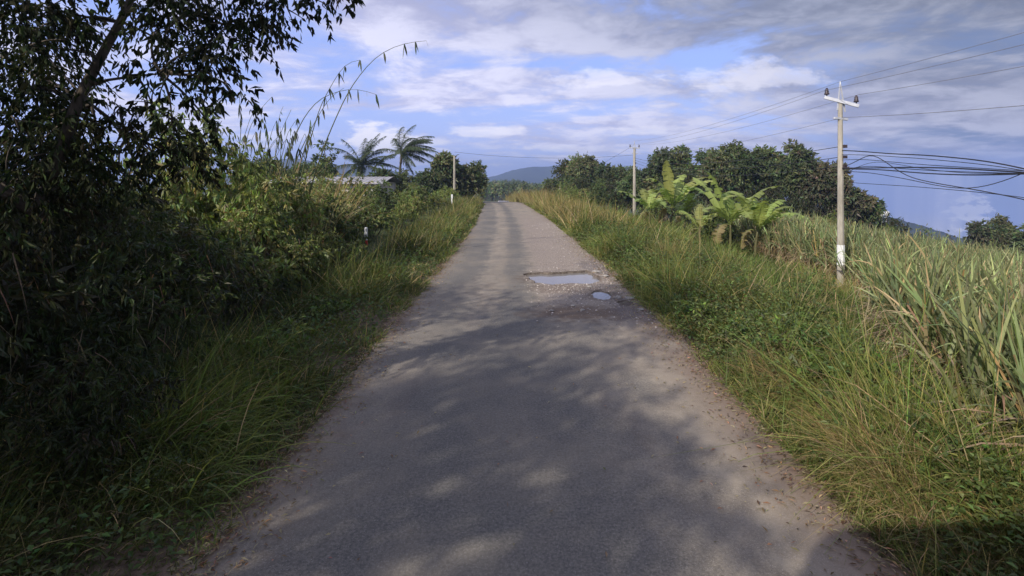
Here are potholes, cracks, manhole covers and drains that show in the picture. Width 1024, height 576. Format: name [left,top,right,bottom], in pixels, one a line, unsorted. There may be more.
pothole [523,270,602,283]
